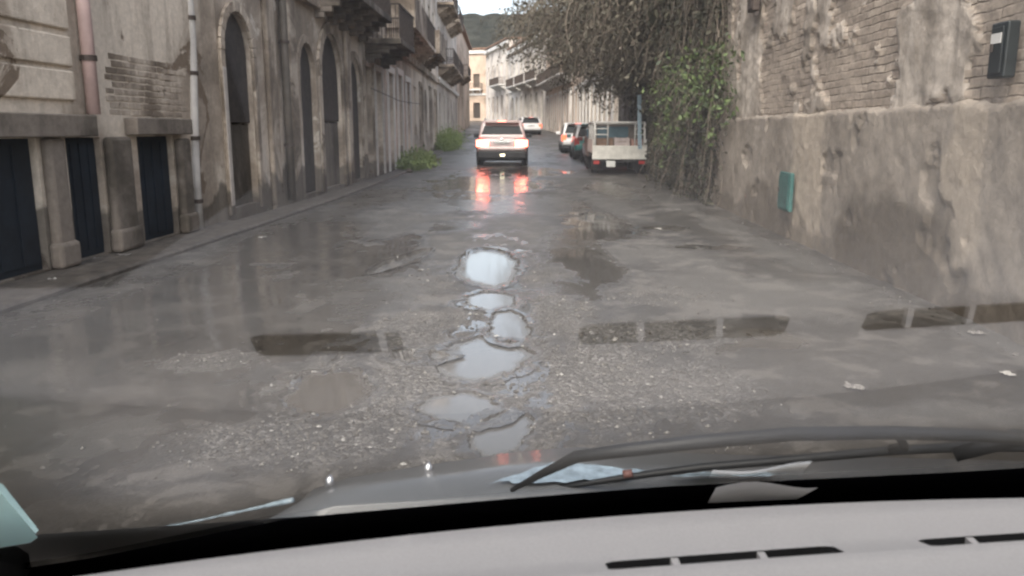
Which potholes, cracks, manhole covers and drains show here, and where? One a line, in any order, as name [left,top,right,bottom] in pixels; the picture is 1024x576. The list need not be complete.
pothole [447,403,555,451]
pothole [412,332,551,387]
pothole [445,246,530,291]
pothole [451,289,530,313]
pothole [475,305,545,348]
pothole [393,384,526,431]
